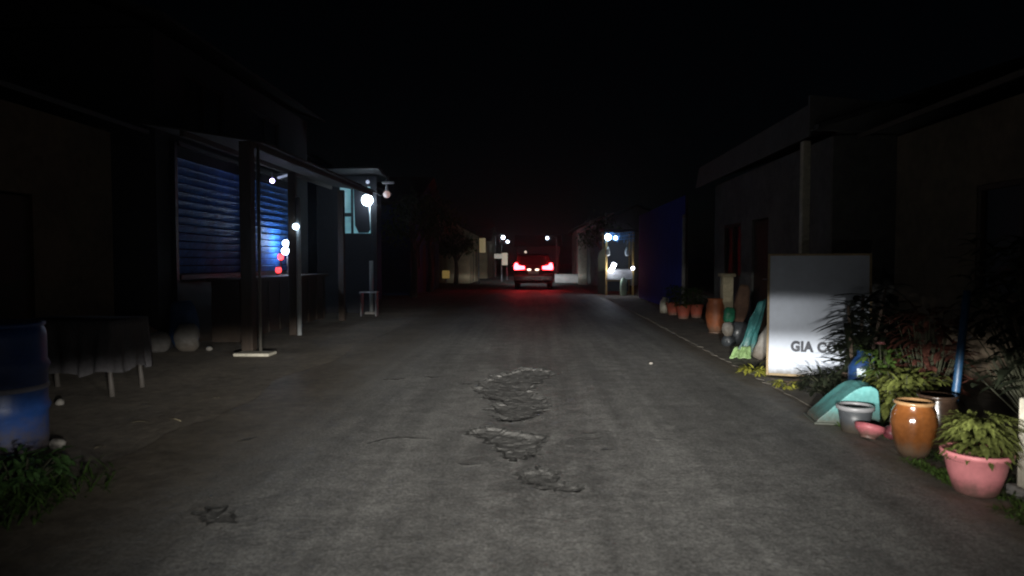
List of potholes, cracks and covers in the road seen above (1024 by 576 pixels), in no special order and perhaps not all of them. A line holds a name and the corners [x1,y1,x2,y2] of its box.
pothole [178,496,256,532]
crack [364,436,433,445]
pothole [447,424,557,464]
pothole [467,366,565,424]
pothole [495,464,594,496]
